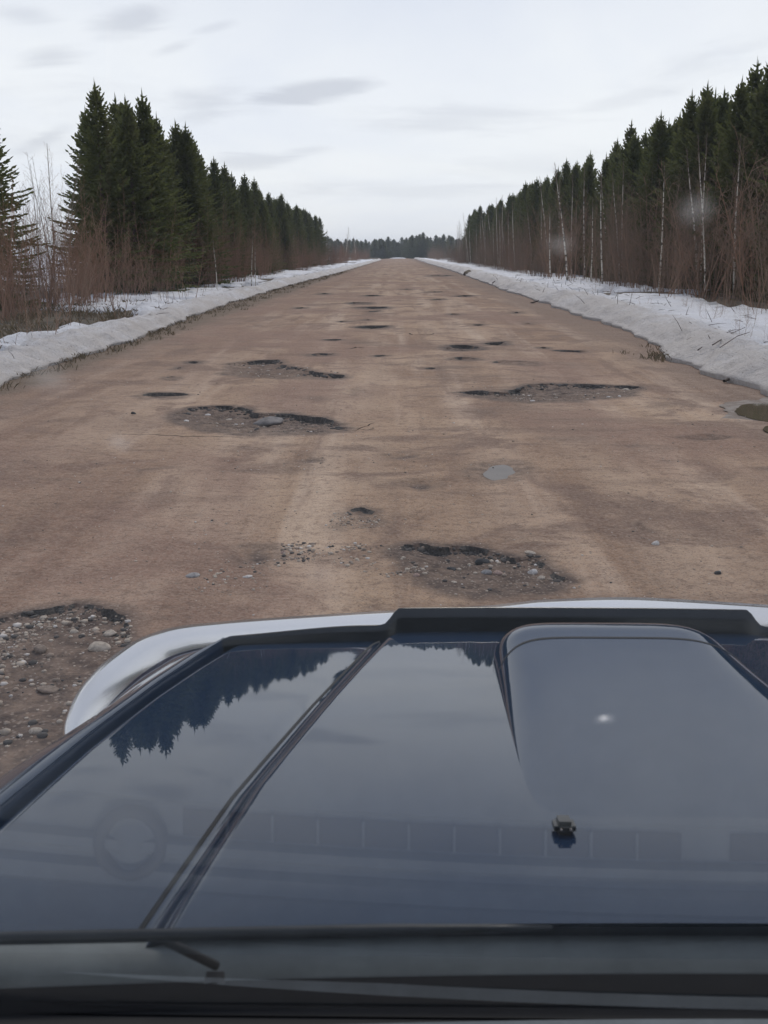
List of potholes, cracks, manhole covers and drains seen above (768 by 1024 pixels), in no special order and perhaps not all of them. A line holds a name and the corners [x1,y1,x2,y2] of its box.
pothole [460,383,641,402]
pothole [222,360,345,379]
pothole [337,507,383,530]
pothole [171,406,348,436]
pothole [0,603,132,769]
pothole [465,459,531,482]
pothole [396,543,571,595]
